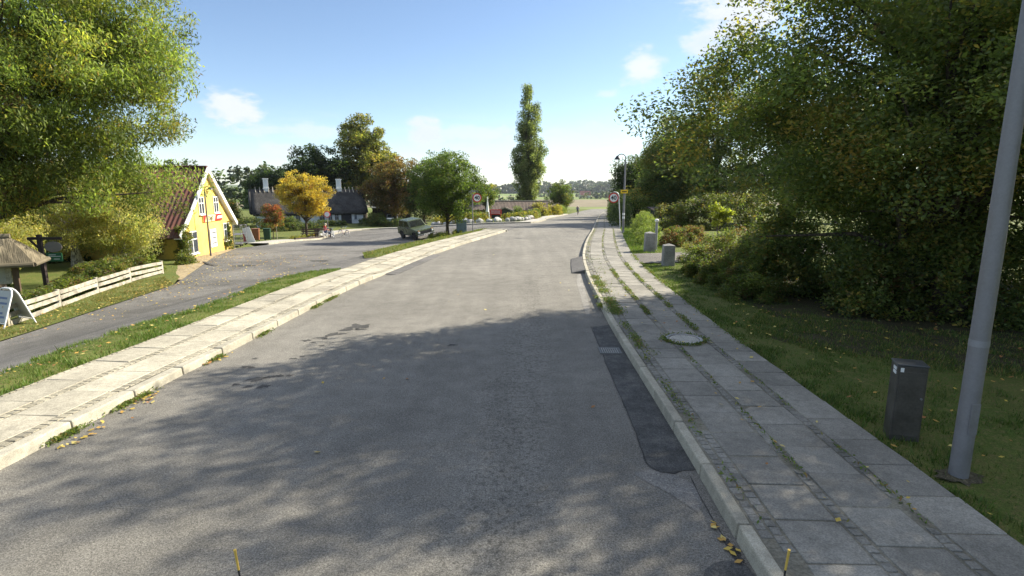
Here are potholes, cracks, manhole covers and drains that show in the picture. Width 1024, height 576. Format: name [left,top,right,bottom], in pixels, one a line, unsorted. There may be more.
manhole cover [666,334,703,345]
